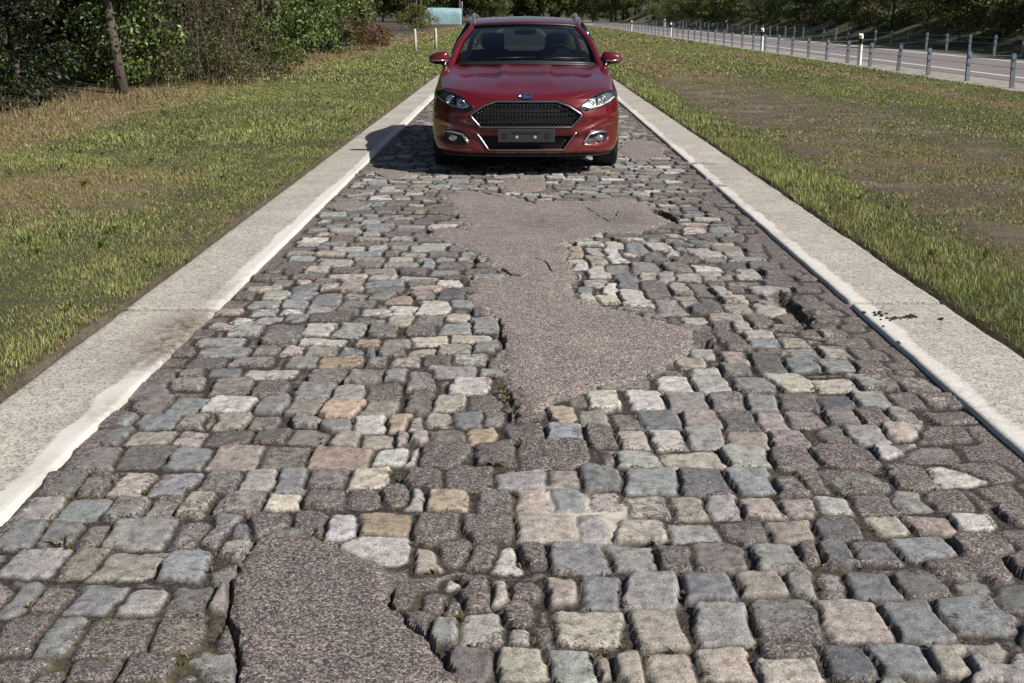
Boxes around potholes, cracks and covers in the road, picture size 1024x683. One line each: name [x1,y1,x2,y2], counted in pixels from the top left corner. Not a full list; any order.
pothole [650,209,681,224]
crack [500,257,552,280]
crack [215,542,256,683]
pothole [767,289,817,330]
